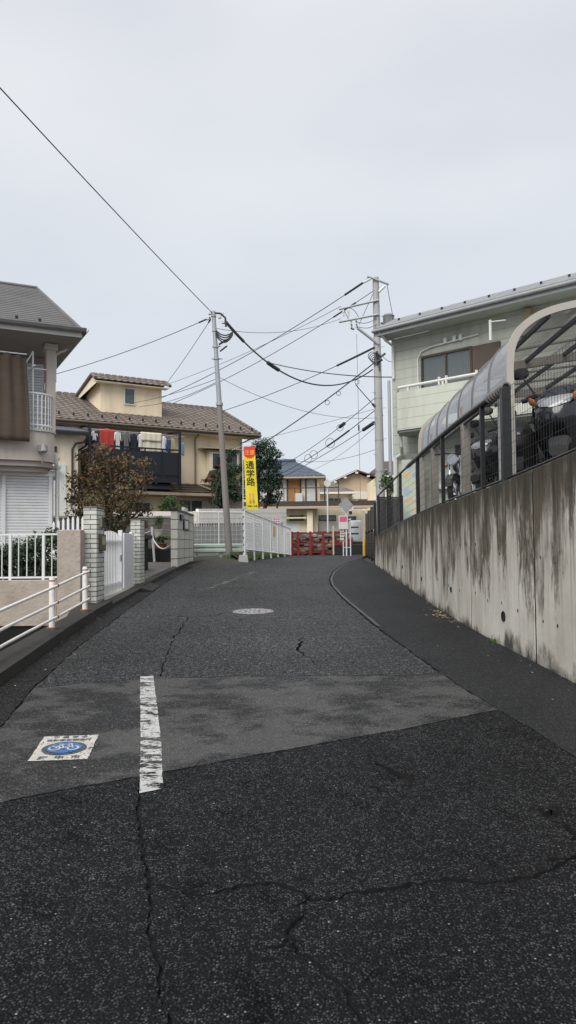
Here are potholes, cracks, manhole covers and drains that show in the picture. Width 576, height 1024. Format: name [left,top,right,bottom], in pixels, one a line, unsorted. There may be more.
crack [135,780,576,1024]
crack [296,637,321,667]
crack [159,613,224,677]
crack [368,763,414,793]
